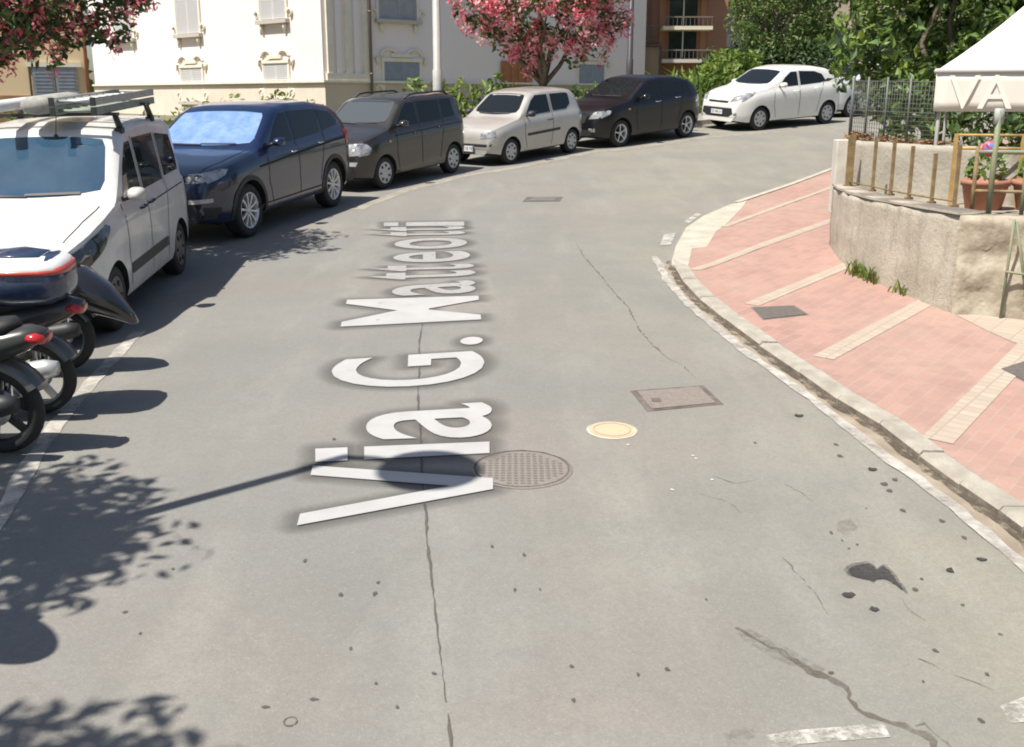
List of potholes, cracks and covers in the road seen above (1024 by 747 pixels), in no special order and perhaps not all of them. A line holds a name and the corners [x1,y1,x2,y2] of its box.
crack [734,627,937,747]
crack [578,246,689,371]
pothole [846,562,906,592]
manhole cover [587,421,637,439]
manhole cover [631,385,723,411]
crack [417,322,453,747]
manhole cover [471,450,573,489]
